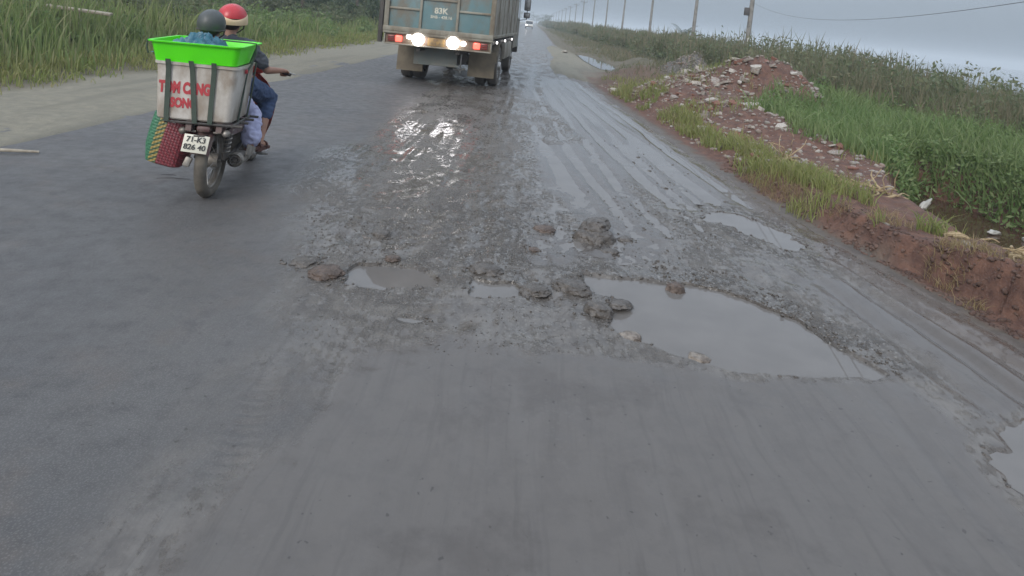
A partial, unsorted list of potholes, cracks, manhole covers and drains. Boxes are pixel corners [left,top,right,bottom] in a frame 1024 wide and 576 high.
pothole [700,210,812,251]
pothole [462,275,532,299]
pothole [580,269,890,380]
pothole [339,260,443,292]
pothole [980,418,1024,496]
